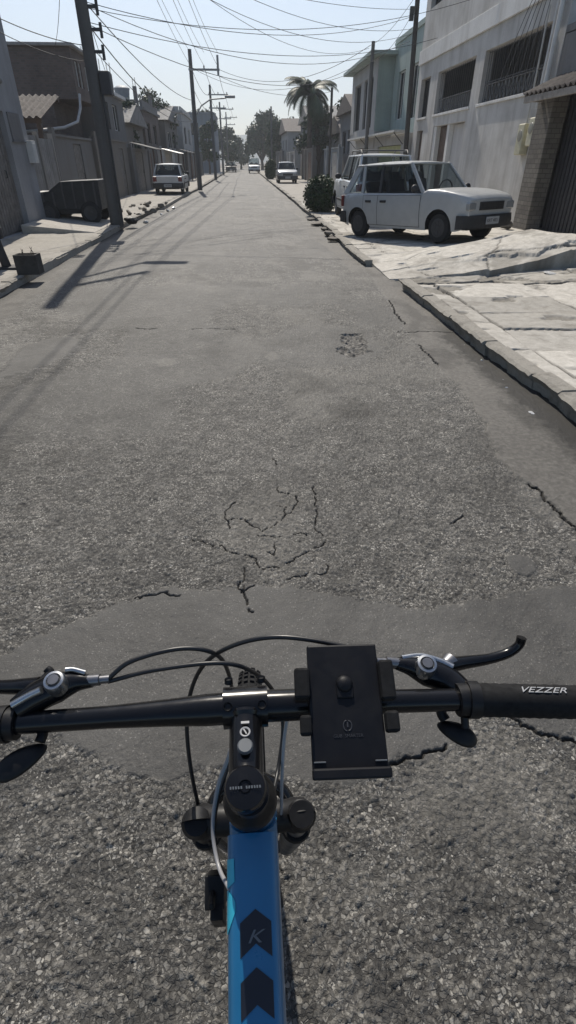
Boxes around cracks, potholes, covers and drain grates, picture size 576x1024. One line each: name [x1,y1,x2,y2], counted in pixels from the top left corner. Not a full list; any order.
crack [528,484,576,529]
pothole [335,332,372,358]
crack [388,300,451,365]
crack [134,591,180,599]
crack [192,460,329,613]
